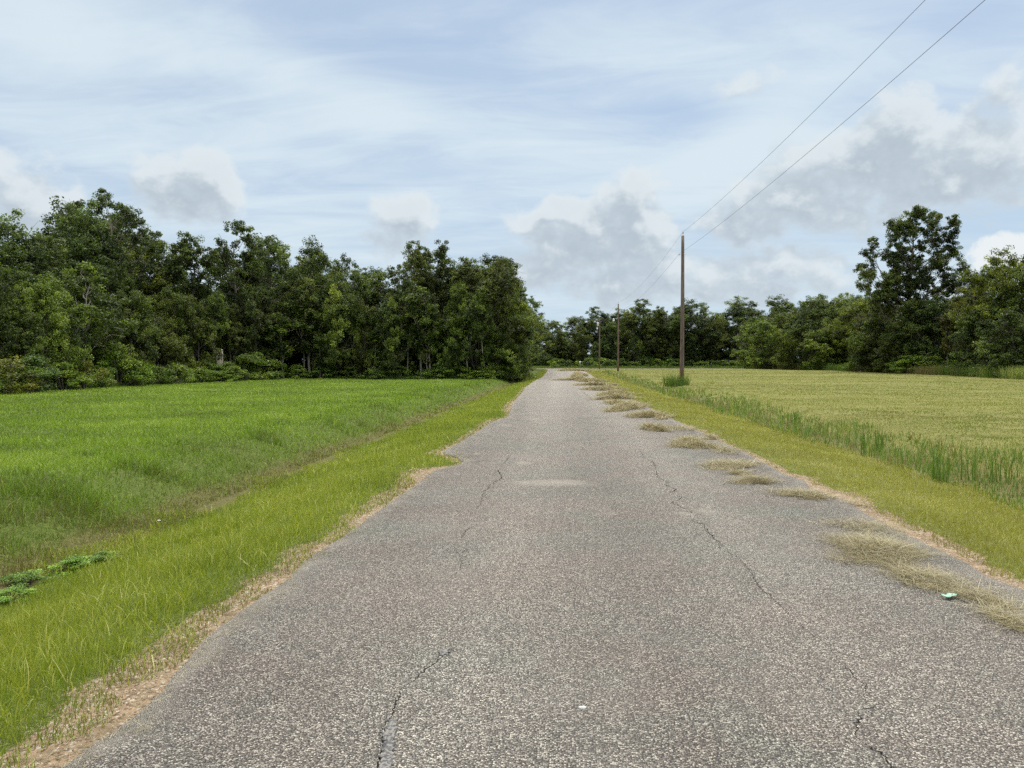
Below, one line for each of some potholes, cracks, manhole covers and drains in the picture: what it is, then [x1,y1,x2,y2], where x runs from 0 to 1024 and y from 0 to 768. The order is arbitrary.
crack [372,654,446,768]
crack [636,447,892,768]
